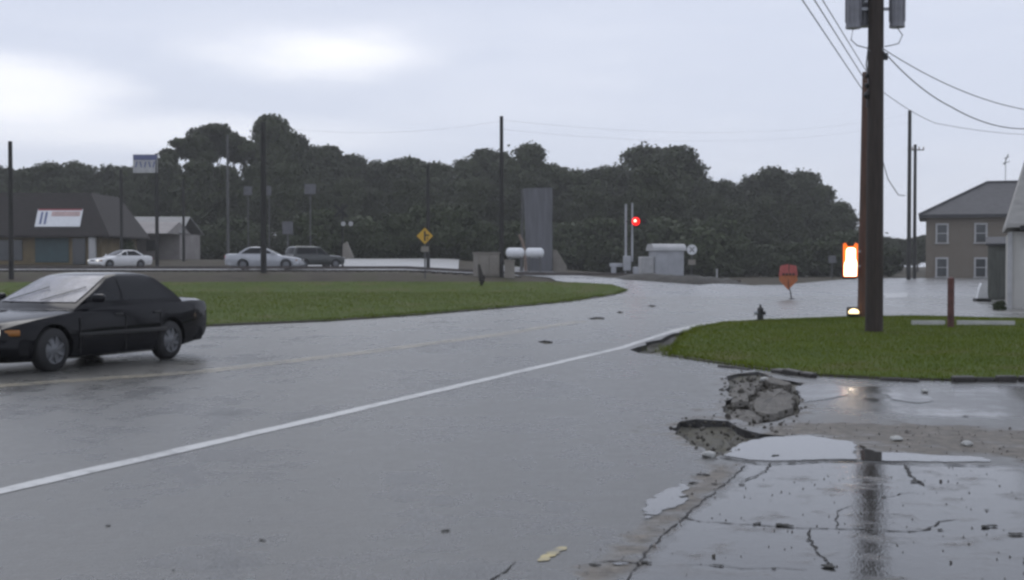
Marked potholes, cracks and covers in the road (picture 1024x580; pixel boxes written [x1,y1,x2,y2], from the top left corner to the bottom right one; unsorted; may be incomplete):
pothole [670,419,785,457]
crack [593,457,995,580]
pothole [723,372,804,415]
